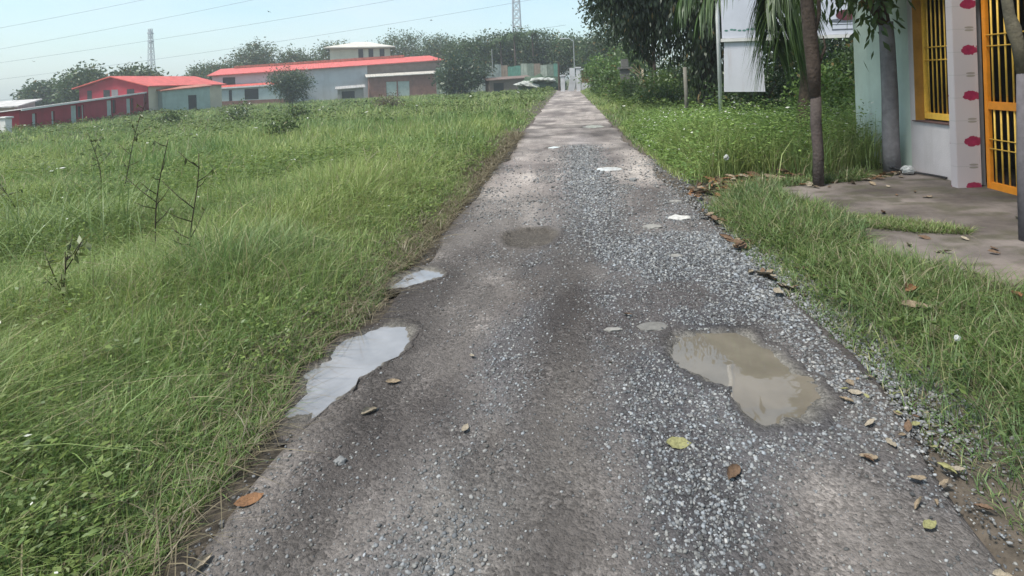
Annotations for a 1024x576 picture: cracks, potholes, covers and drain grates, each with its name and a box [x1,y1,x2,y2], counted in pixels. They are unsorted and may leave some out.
pothole [266,317,424,448]
pothole [379,265,450,294]
pothole [657,324,847,438]
pothole [495,225,564,251]
